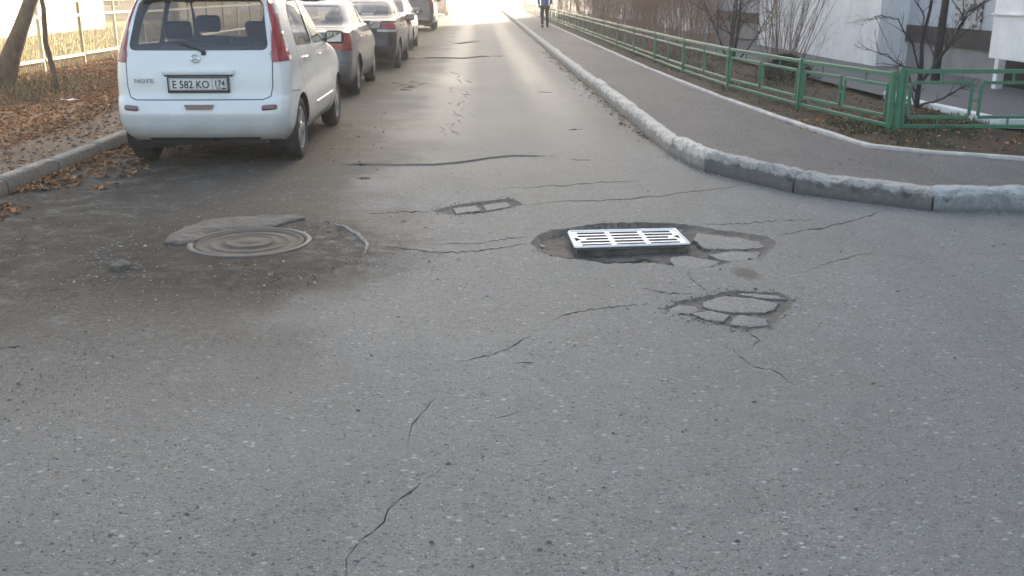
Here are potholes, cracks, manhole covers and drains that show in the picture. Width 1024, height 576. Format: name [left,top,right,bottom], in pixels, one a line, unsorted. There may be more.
pothole [663,291,793,331]
crack [389,236,527,253]
crack [345,469,441,576]
manhole cover [164,214,369,258]
drain grate [567,228,690,257]
crack [701,209,887,236]
crack [456,337,533,364]
crack [557,271,707,319]
pothole [530,222,776,268]
crack [505,180,741,205]
crack [440,71,472,135]
crack [732,335,795,386]
